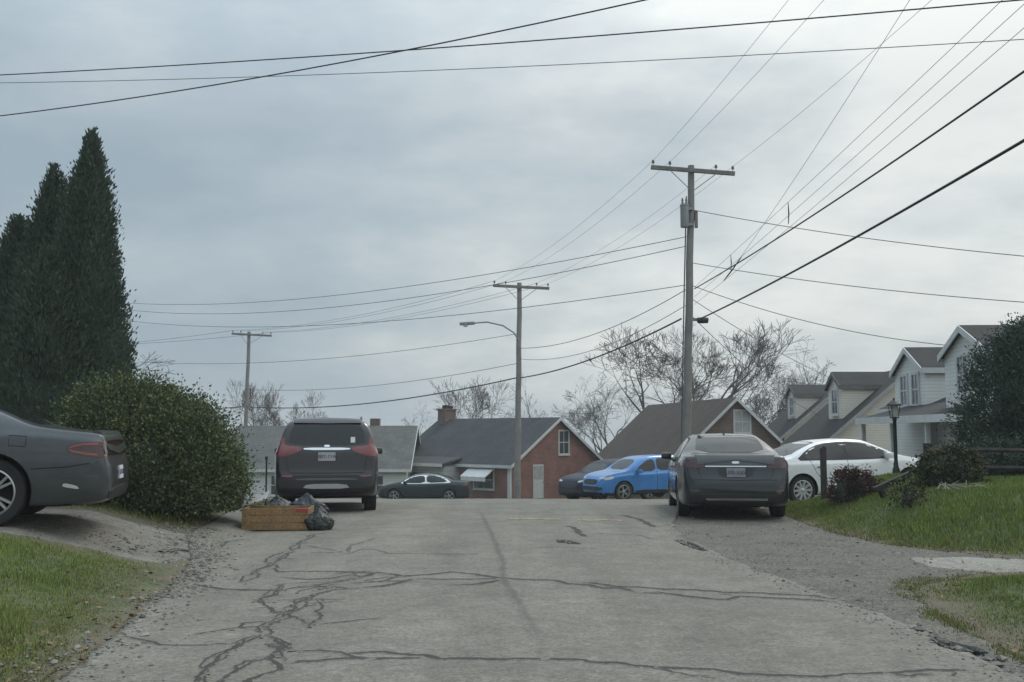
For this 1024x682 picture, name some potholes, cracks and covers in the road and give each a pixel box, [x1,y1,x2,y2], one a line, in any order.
crack [536,515,657,549]
crack [117,528,979,682]
pothole [929,638,989,656]
